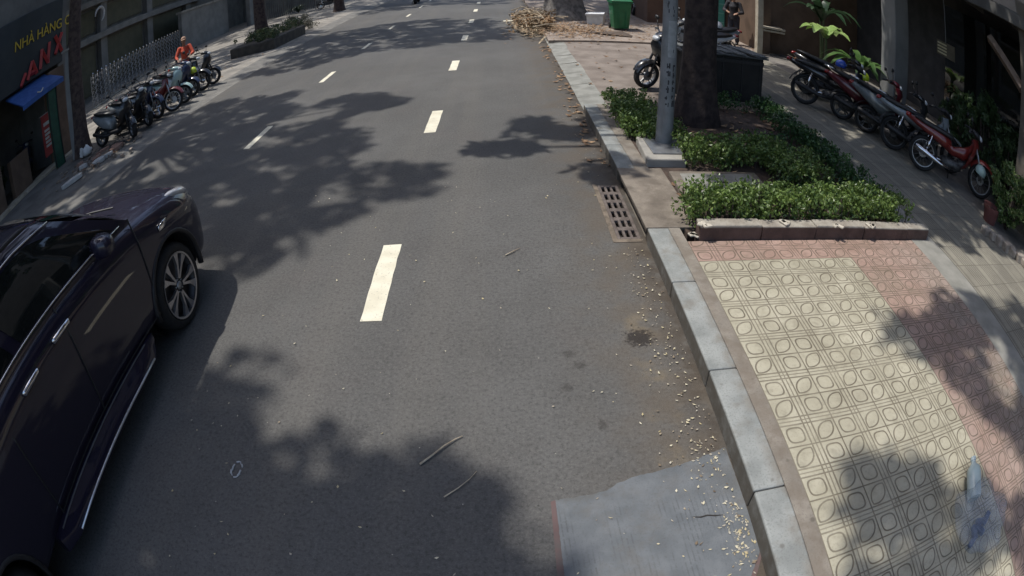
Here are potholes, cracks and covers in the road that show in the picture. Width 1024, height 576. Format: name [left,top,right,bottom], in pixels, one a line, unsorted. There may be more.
drain grate [592,184,643,243]
